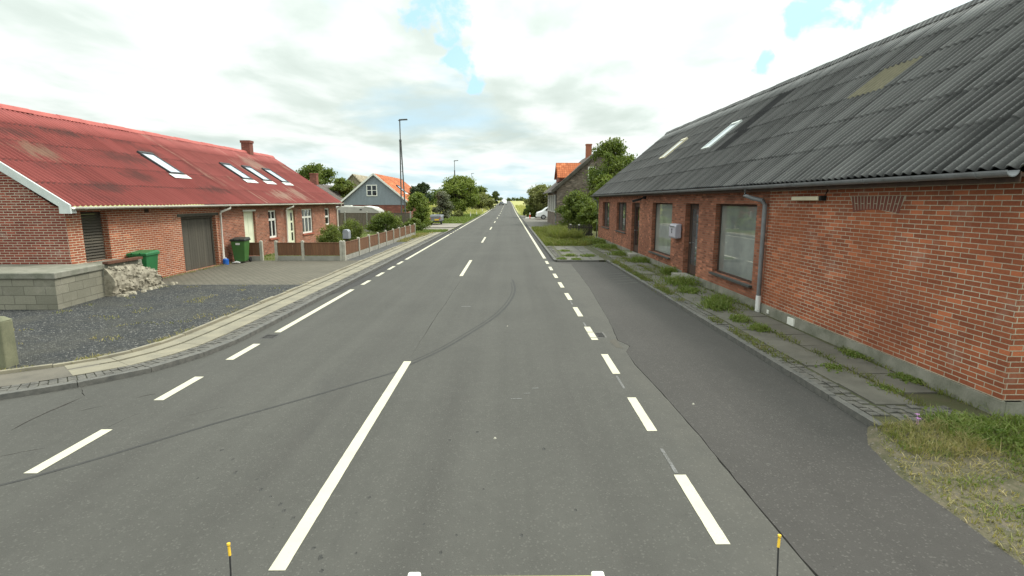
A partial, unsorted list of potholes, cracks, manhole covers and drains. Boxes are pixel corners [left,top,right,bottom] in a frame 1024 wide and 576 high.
crack [12,390,152,430]
